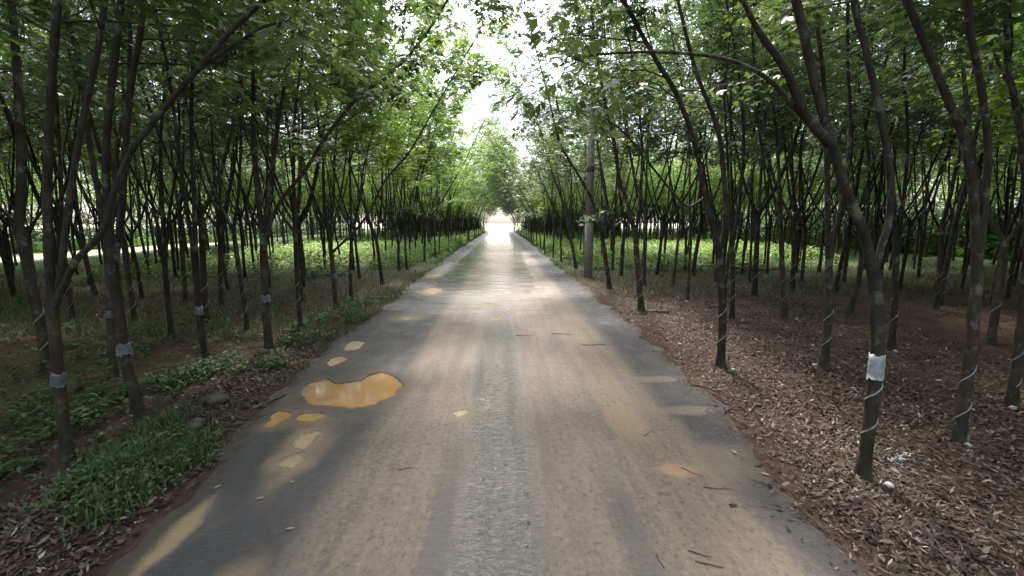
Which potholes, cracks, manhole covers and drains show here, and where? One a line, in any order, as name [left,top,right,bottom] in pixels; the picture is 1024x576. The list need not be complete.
pothole [274,452,308,470]
pothole [327,356,347,366]
pothole [289,430,321,451]
pothole [263,411,291,427]
pothole [295,413,325,421]
pothole [300,371,403,409]
pothole [344,340,366,351]
